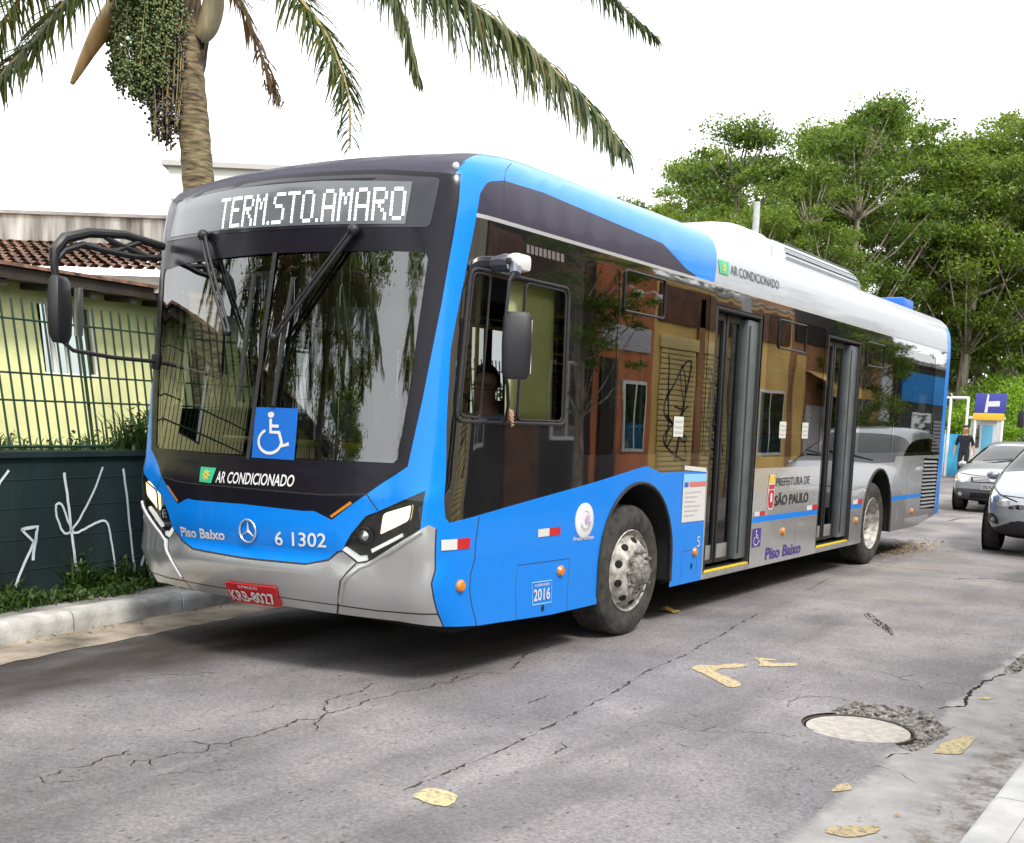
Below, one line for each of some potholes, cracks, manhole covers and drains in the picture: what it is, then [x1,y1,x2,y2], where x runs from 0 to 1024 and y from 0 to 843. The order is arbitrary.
manhole cover [802,714,916,746]
crack [883,672,1005,709]
crack [39,672,504,784]
crack [404,613,758,790]
